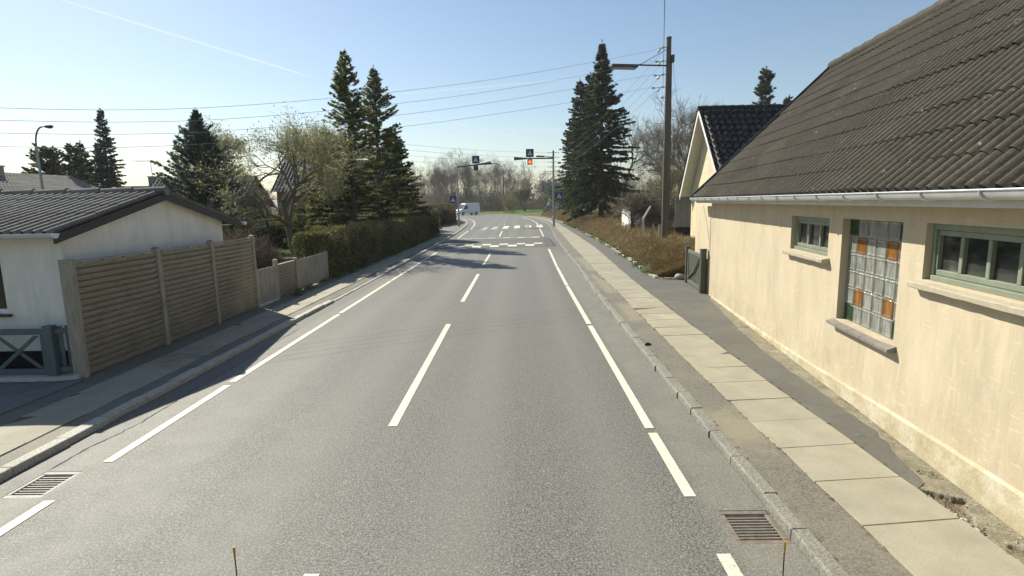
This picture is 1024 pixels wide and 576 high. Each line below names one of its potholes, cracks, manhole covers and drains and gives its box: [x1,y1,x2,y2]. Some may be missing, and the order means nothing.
drain grate [718,511,792,544]
drain grate [2,472,81,498]
